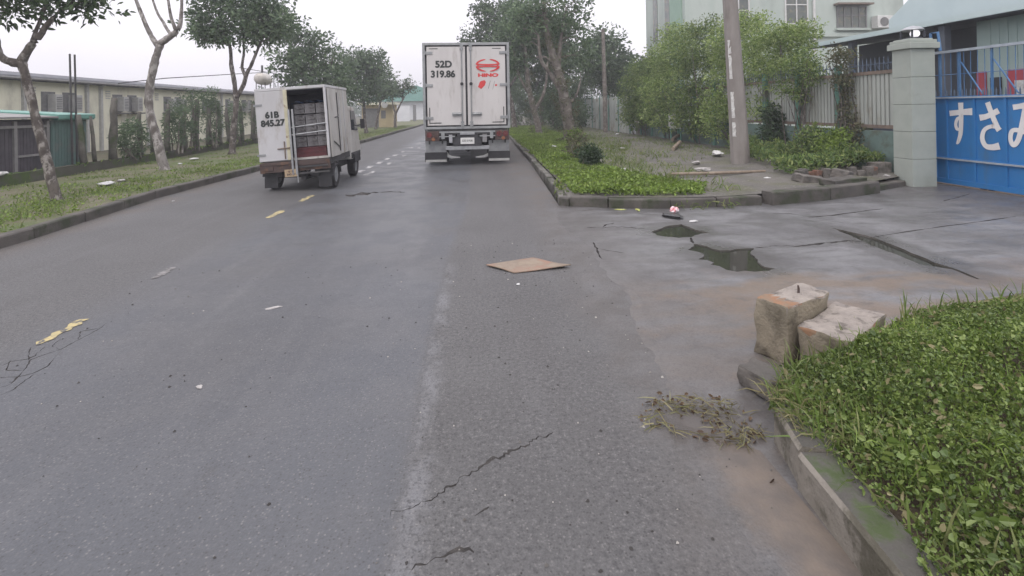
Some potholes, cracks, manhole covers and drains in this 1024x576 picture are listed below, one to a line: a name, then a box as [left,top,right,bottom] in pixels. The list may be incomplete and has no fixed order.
crack [0,325,104,393]
crack [390,432,553,514]
crack [412,507,489,570]
pothole [688,244,774,272]
crack [587,223,644,258]
pothole [652,224,710,239]
